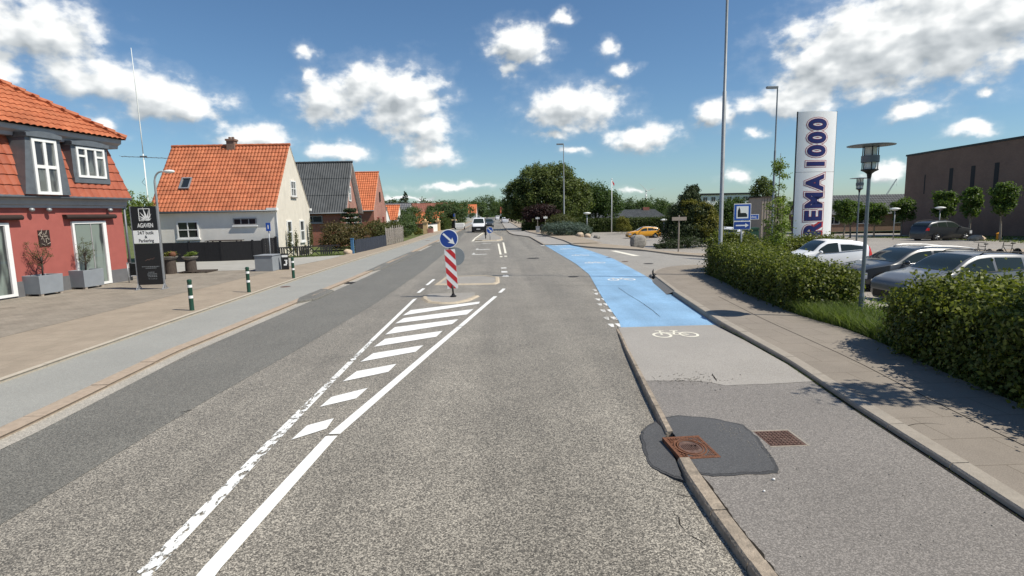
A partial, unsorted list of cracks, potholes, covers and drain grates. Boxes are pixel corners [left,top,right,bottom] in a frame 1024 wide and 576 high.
manhole cover [662,435,721,462]
drain grate [752,429,810,447]
